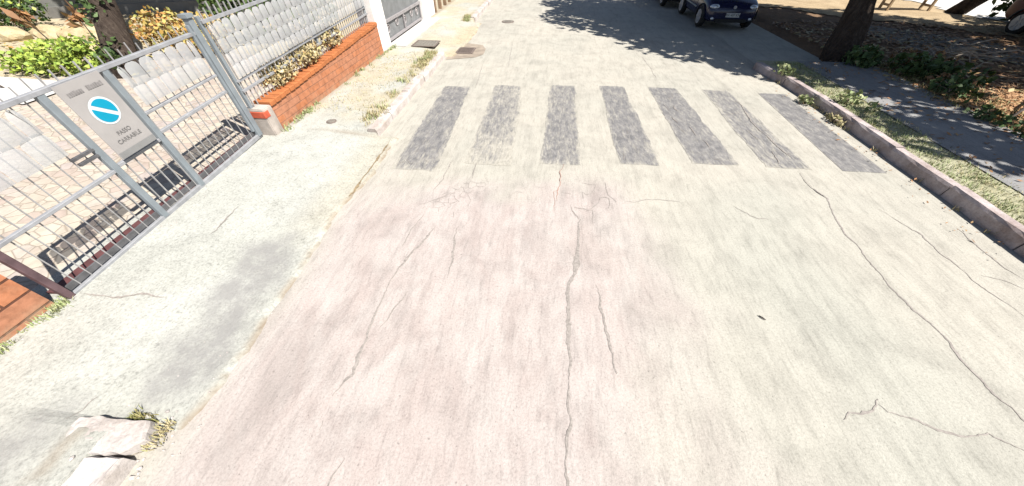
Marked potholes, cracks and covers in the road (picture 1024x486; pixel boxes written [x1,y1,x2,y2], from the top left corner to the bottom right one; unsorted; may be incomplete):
crack [319,160,488,486]
crack [801,174,1024,450]
crack [516,164,617,486]
